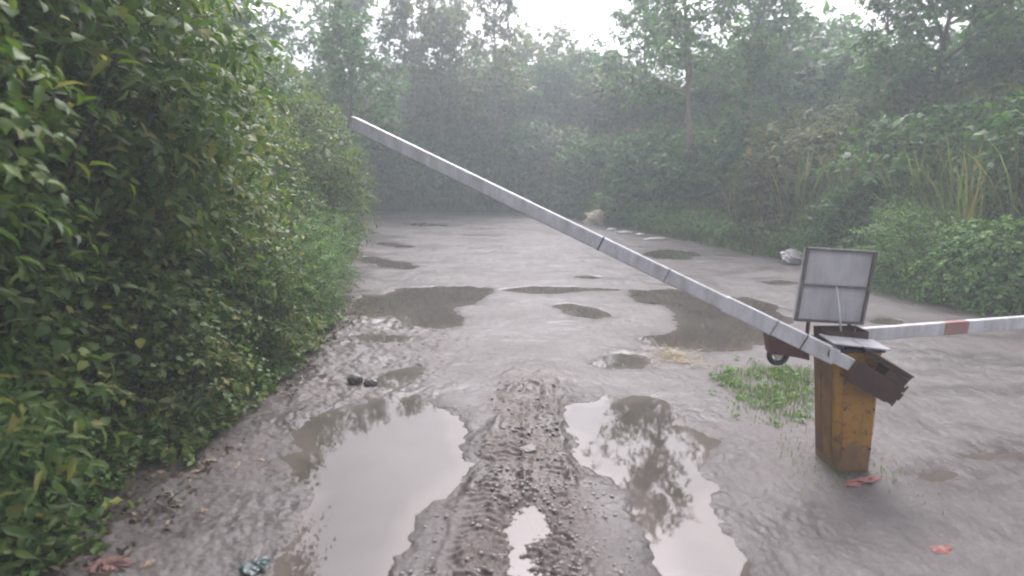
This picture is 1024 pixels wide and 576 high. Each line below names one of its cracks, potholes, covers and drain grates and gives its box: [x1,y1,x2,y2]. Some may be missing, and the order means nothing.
pothole [589,351,654,370]
pothole [624,287,799,353]
pothole [641,249,707,260]
pothole [550,302,615,319]
pothole [264,394,486,576]
pothole [342,285,498,331]
pothole [500,285,630,294]
pothole [498,498,553,576]
pothole [557,390,762,576]
pothole [352,256,422,270]
